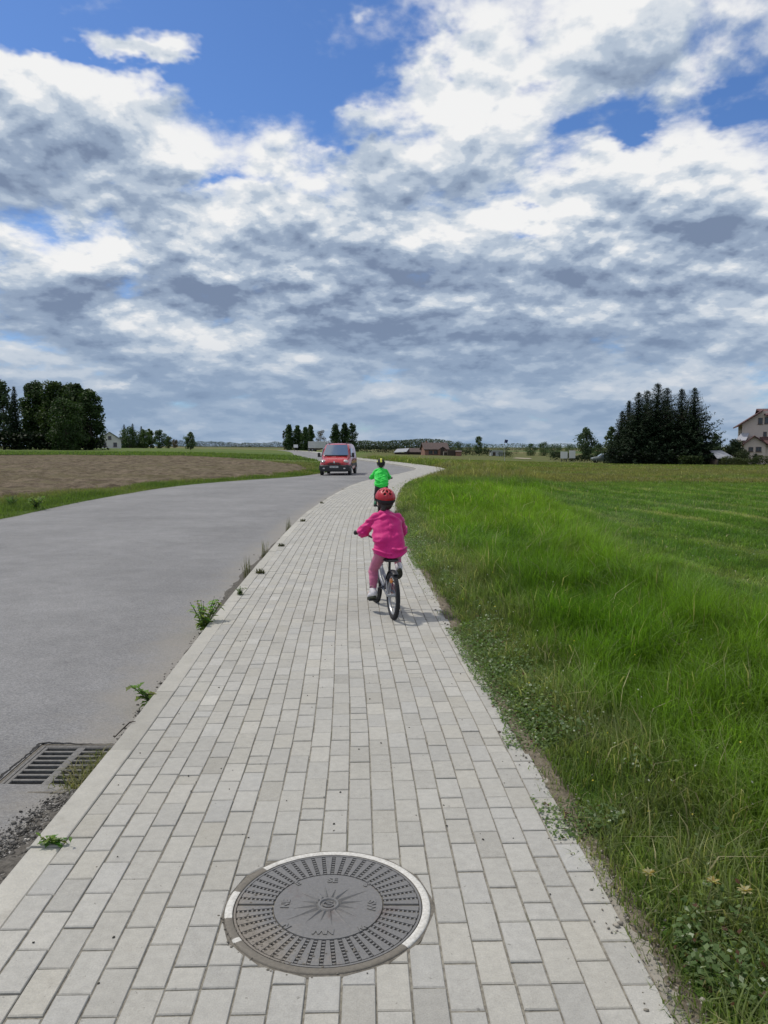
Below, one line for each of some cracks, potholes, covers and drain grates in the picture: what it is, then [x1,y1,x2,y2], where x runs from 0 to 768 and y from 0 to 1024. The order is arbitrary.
manhole cover [217,851,435,978]
drain grate [0,744,115,794]
